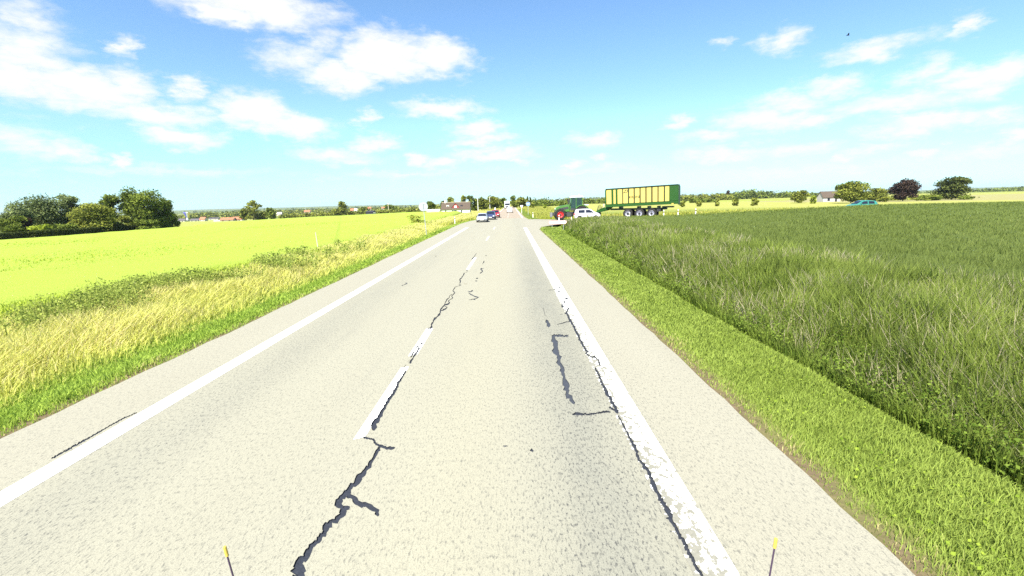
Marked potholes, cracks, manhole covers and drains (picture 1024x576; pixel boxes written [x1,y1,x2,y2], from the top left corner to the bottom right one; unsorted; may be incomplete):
crack [290,254,487,576]
crack [51,412,137,459]
crack [543,284,703,576]
